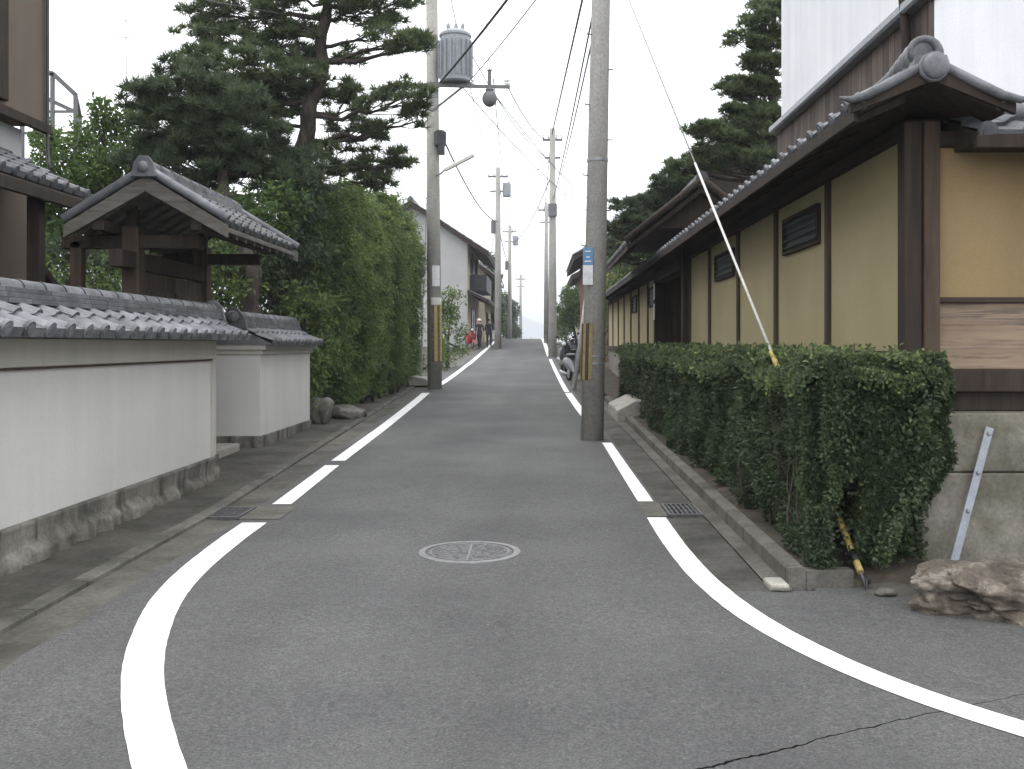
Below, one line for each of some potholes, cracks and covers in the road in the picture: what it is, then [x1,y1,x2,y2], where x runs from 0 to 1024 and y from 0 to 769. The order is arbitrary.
manhole cover [418,541,521,564]
crack [697,694,1023,769]
drain grate [661,503,704,518]
drain grate [207,506,256,521]
